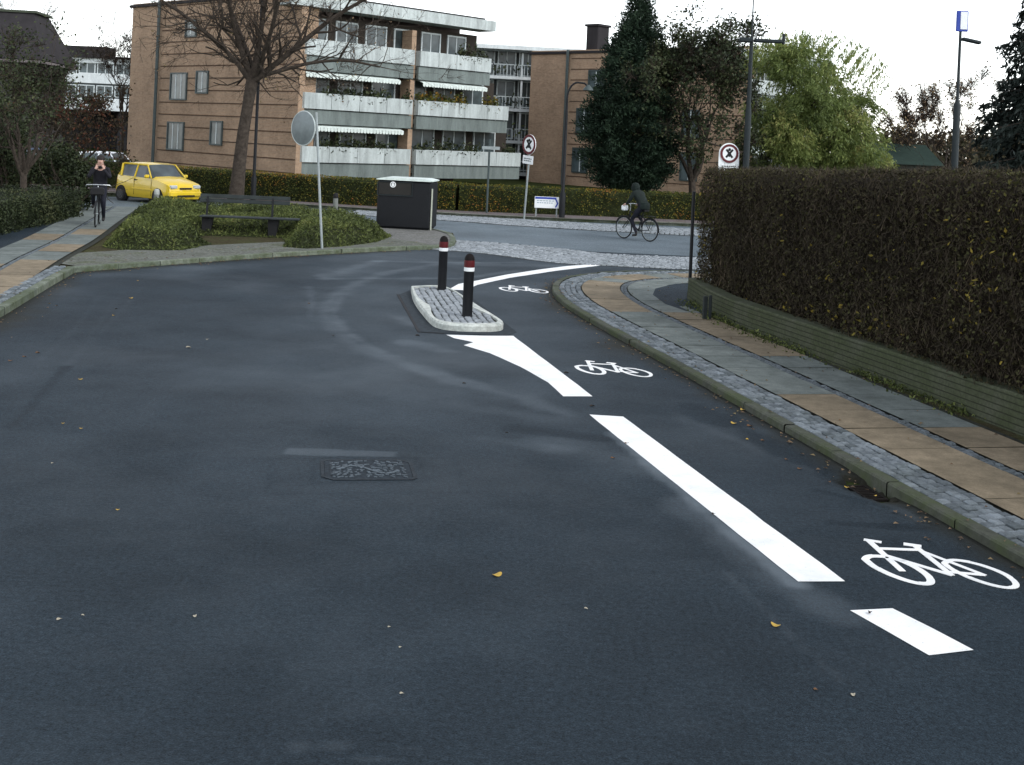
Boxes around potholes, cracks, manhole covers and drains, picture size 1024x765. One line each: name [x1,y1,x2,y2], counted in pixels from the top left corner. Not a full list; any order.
manhole cover [320,459,417,480]
drain grate [845,485,889,502]
